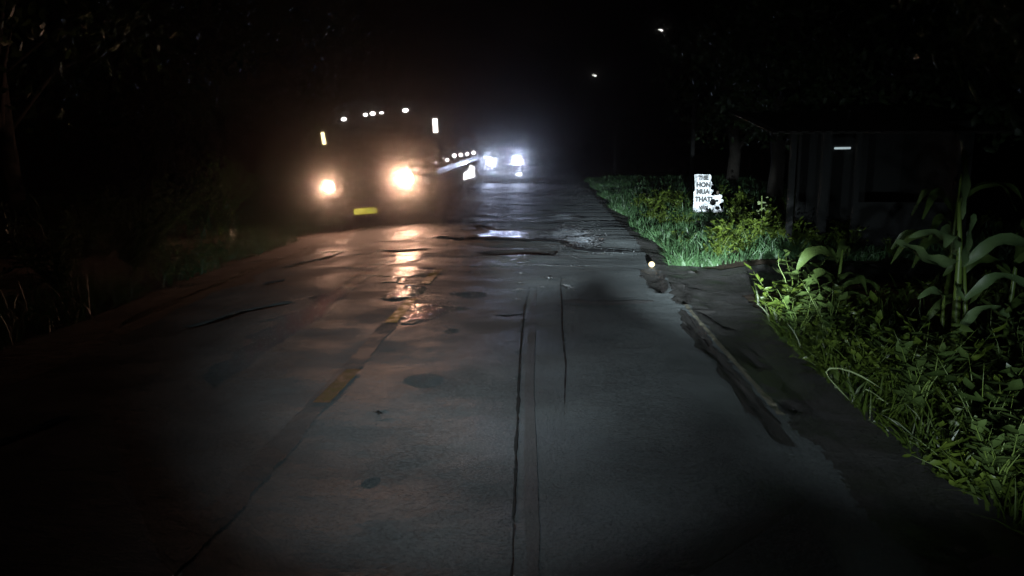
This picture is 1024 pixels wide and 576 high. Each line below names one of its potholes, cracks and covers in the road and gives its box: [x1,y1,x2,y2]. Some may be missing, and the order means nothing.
pothole [640,268,669,293]
crack [267,254,340,285]
pothole [669,283,694,304]
crack [195,305,281,328]
crack [453,225,502,248]
crack [499,288,530,576]
